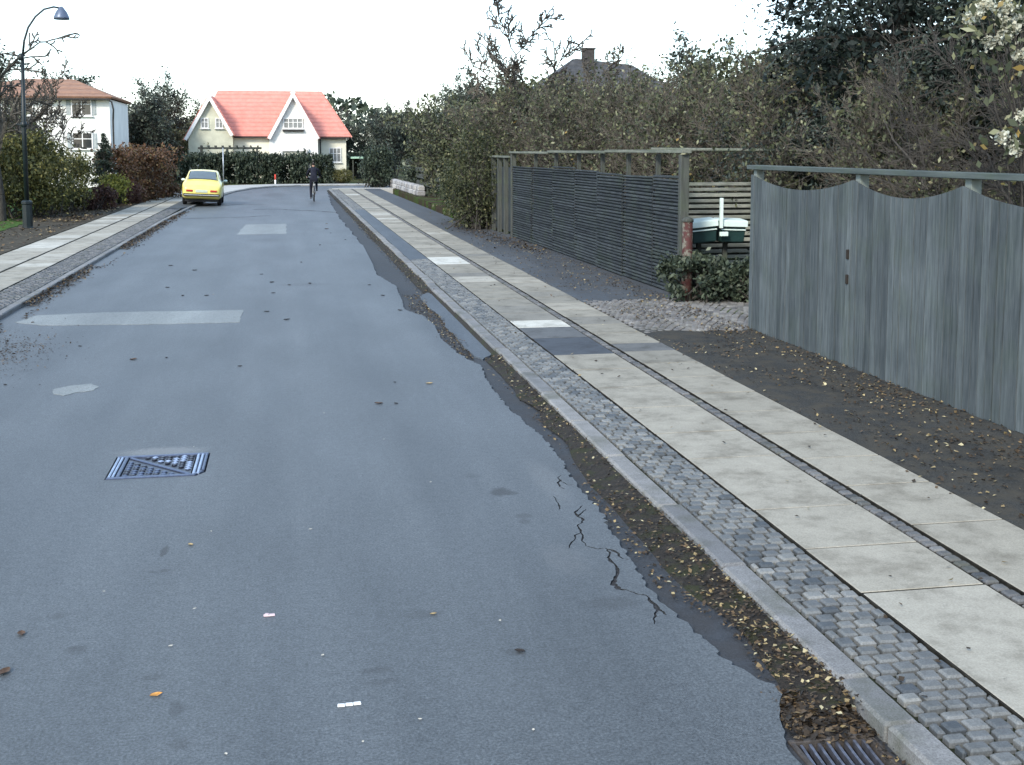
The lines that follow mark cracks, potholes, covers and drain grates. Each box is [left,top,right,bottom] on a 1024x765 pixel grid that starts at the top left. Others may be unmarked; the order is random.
crack [555,476,664,624]
drain grate [788,733,901,765]
